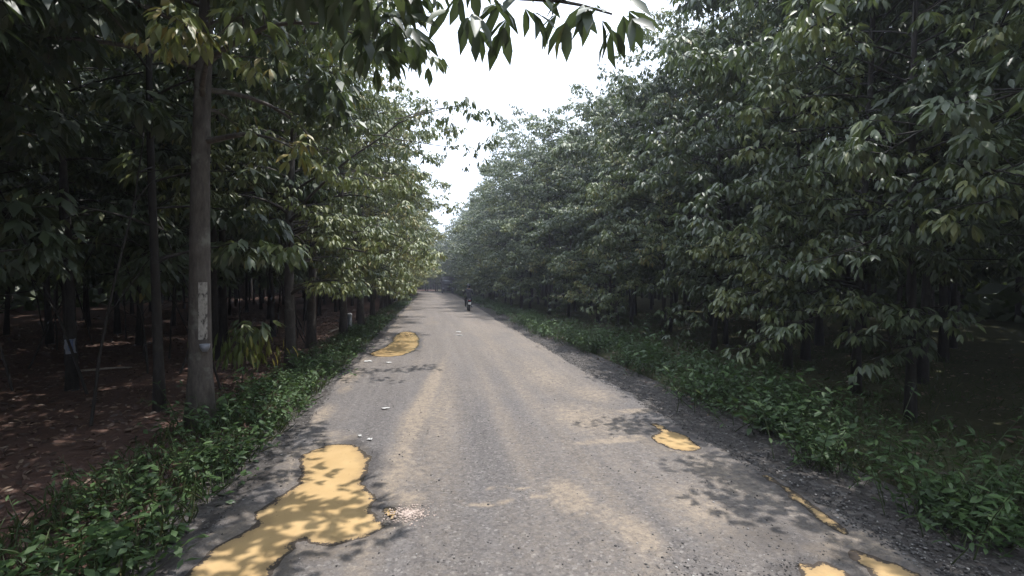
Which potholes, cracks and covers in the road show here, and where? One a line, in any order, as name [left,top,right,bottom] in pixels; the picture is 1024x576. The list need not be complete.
pothole [754,471,858,537]
pothole [171,440,395,576]
pothole [790,553,861,576]
pothole [834,543,933,576]
pothole [365,331,423,357]
pothole [634,418,716,454]
